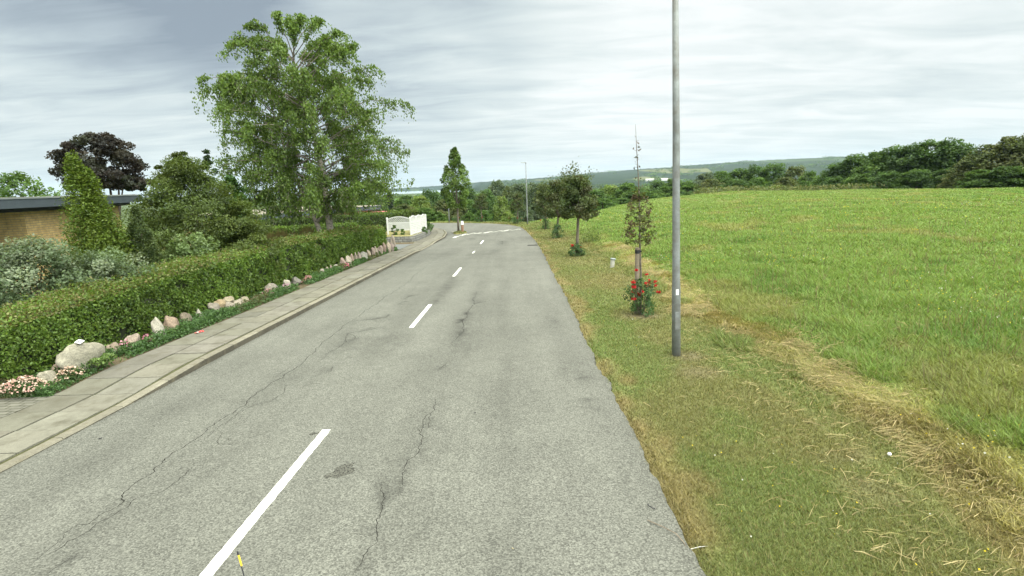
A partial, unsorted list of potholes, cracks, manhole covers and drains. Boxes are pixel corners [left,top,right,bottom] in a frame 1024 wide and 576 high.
crack [17,257,441,574]
